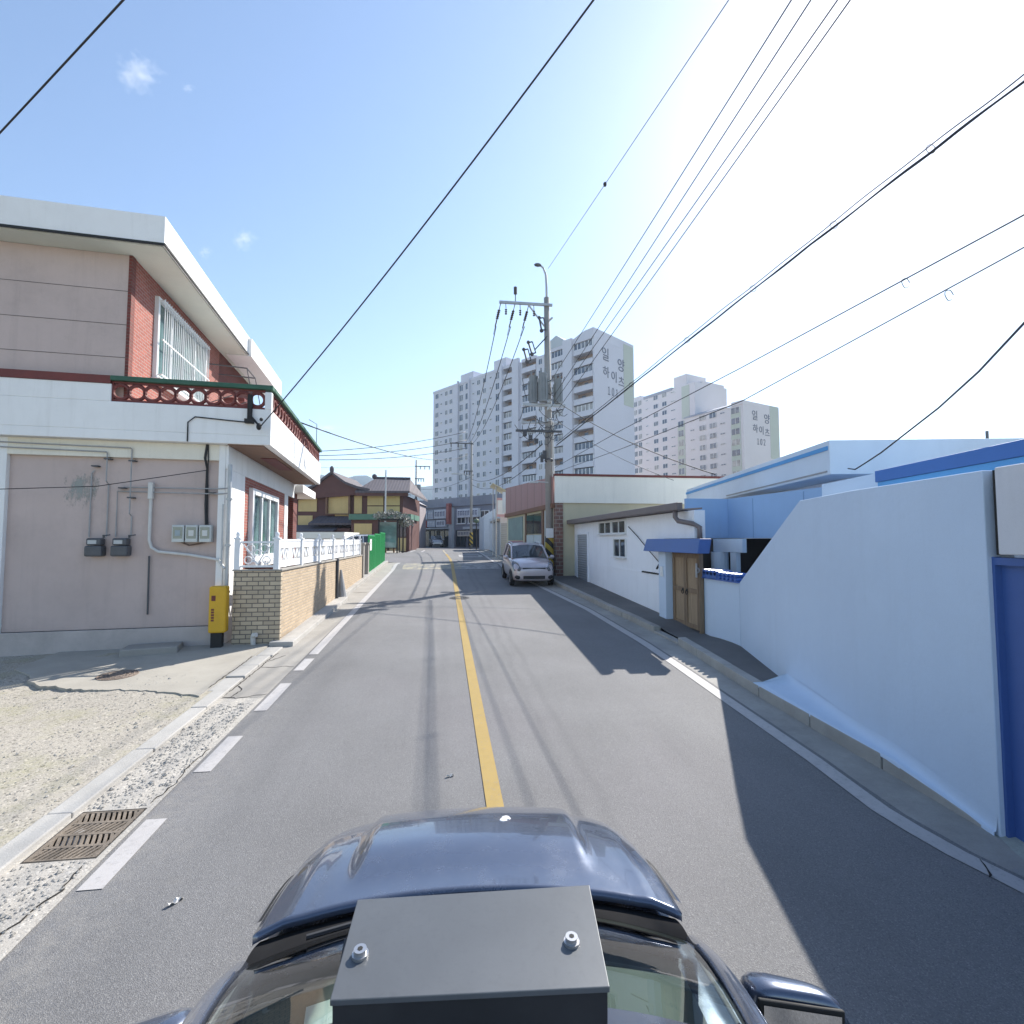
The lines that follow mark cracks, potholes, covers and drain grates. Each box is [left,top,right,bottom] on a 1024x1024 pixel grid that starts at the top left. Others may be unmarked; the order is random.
manhole cover [95,670,139,681]
crack [0,865,83,935]
drain grate [20,808,147,864]
